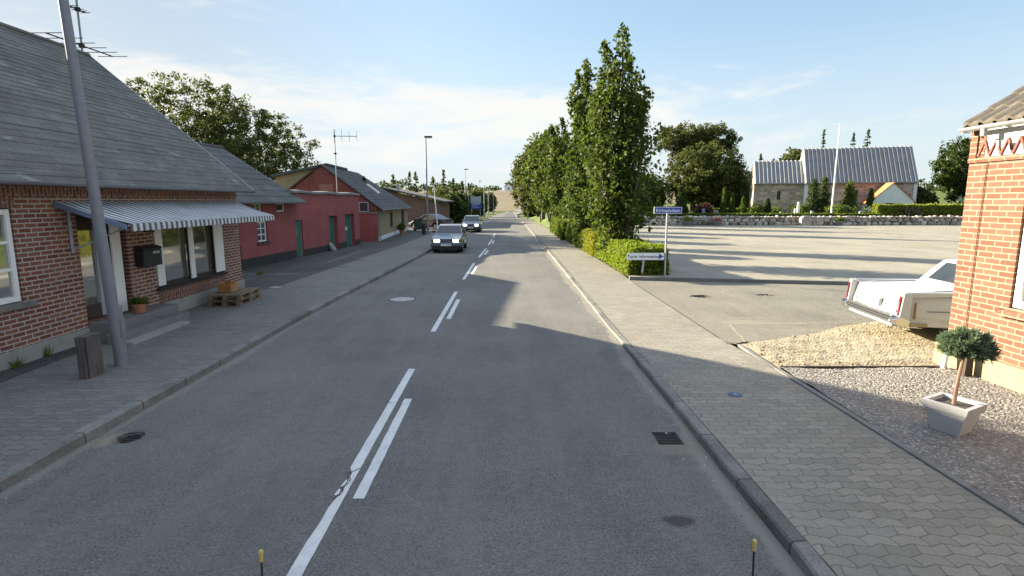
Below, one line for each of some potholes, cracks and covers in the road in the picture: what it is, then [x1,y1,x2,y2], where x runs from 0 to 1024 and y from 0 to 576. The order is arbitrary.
drain grate [652,433,683,445]
drain grate [117,432,145,443]
